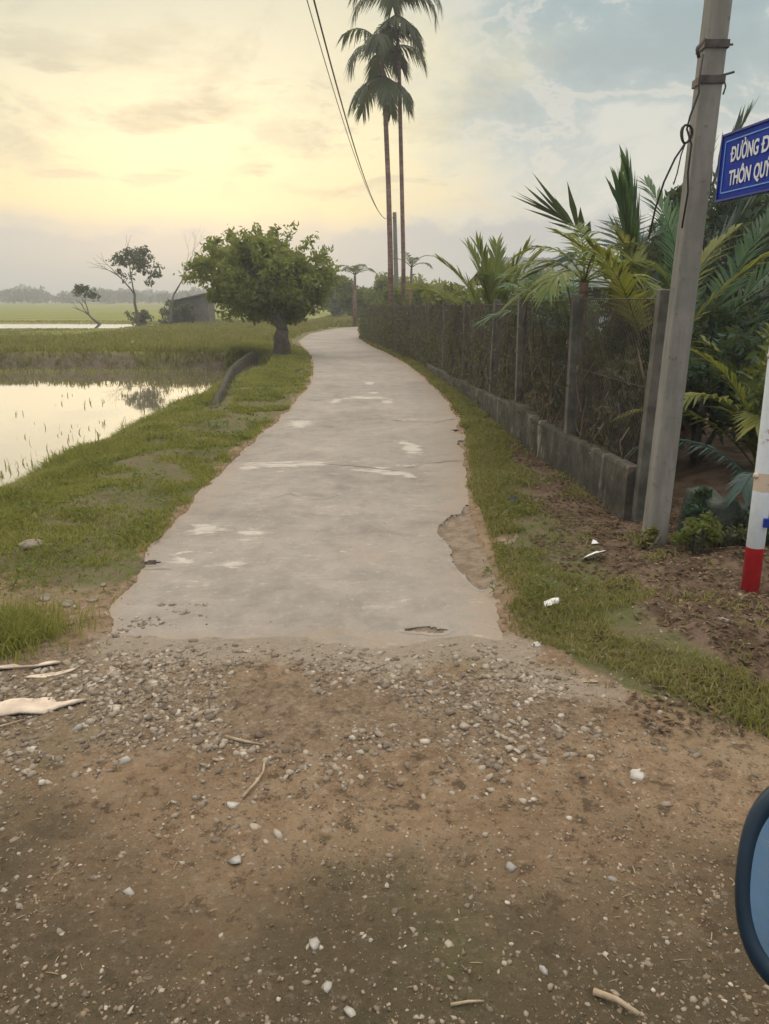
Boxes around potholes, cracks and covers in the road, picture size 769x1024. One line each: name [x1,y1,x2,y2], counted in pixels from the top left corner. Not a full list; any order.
pothole [398,623,454,636]
pothole [433,505,518,592]
